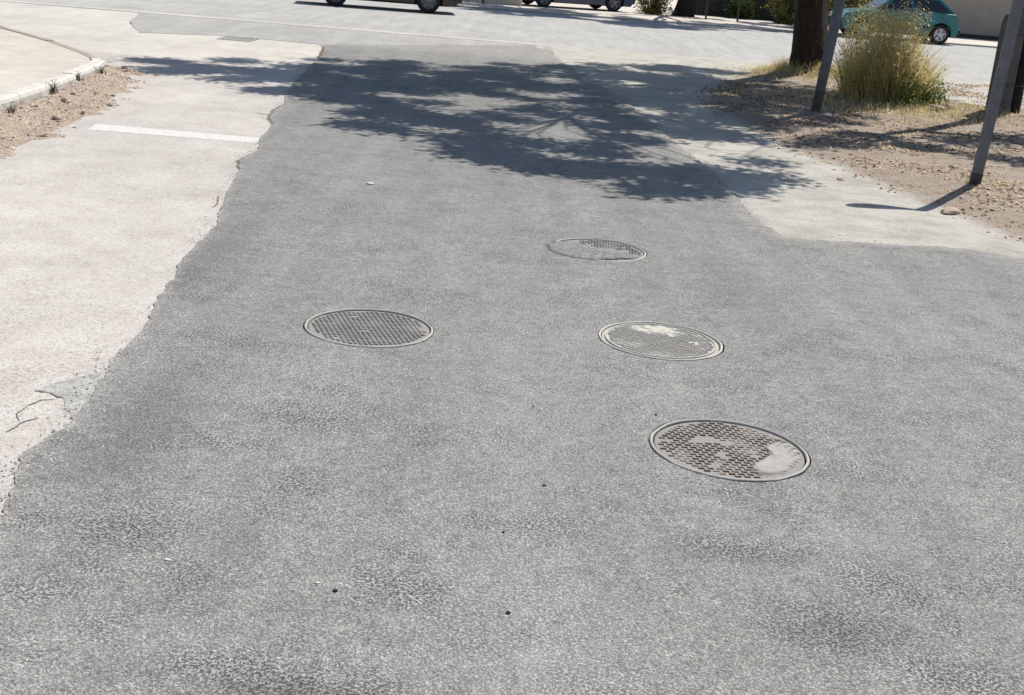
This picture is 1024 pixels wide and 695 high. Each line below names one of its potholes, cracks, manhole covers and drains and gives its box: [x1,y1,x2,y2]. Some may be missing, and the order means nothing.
crack [6,390,60,432]
manhole cover [545,238,647,262]
manhole cover [598,321,724,361]
manhole cover [649,419,811,482]
manhole cover [303,308,434,348]
